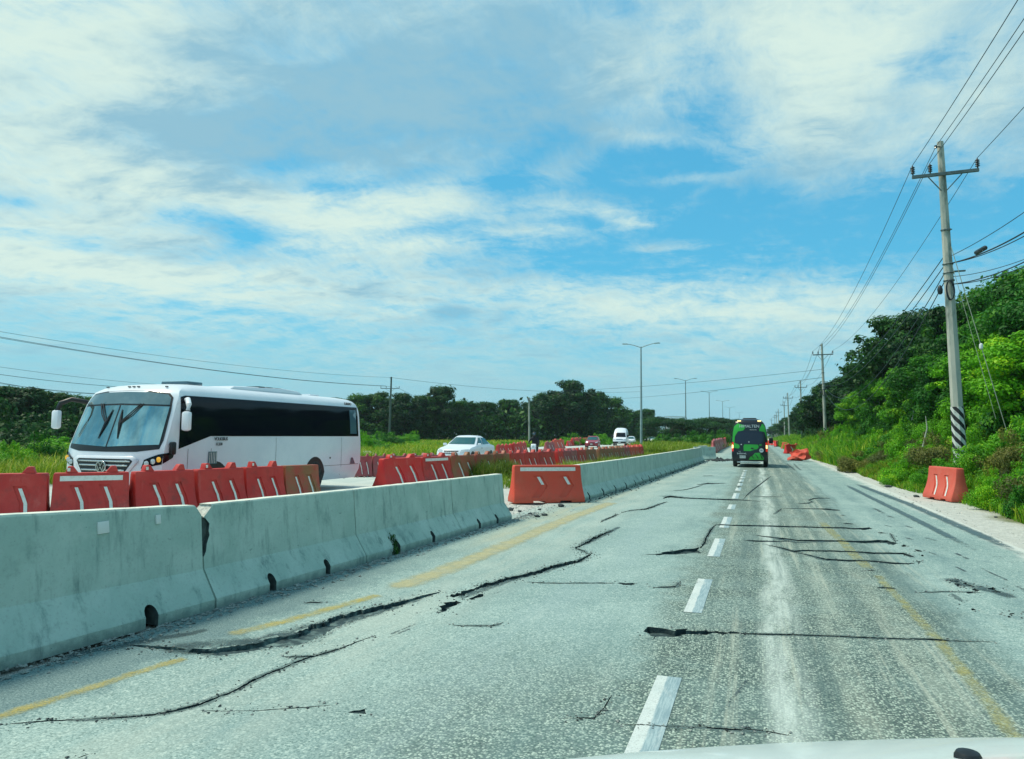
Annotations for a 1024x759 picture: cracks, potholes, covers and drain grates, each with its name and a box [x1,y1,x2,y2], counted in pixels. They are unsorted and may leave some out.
crack [579,697,789,736]
crack [727,631,978,642]
crack [461,476,914,597]
crack [12,592,503,724]
